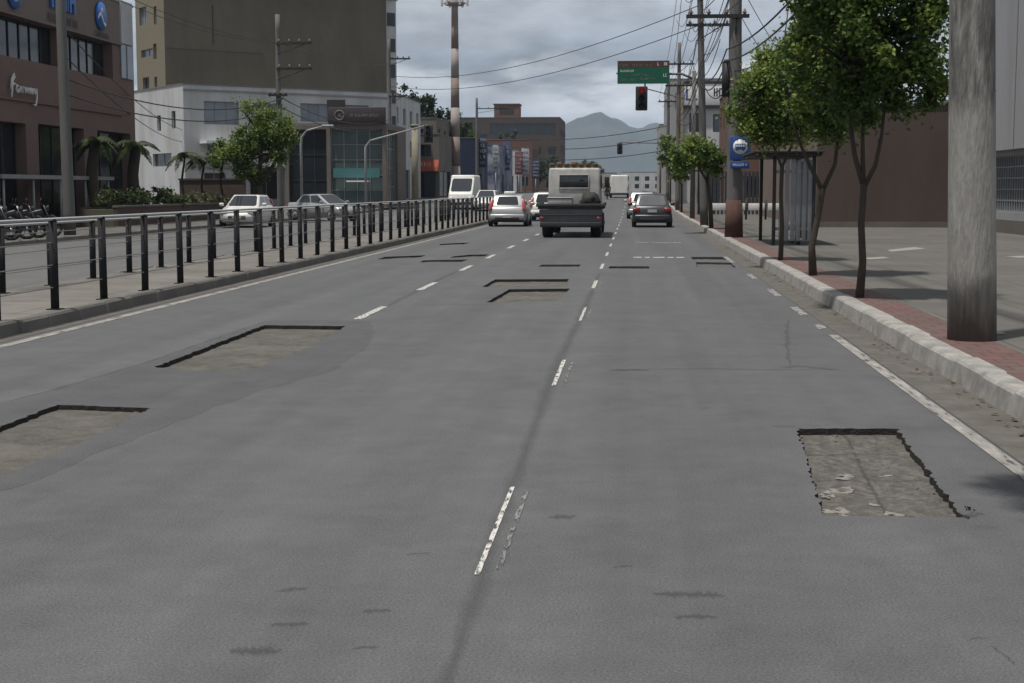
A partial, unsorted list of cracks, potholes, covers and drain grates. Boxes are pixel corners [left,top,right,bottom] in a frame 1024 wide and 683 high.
pothole [483,279,569,287]
pothole [0,405,150,477]
pothole [155,325,345,371]
pothole [488,289,569,302]
pothole [797,428,975,519]
